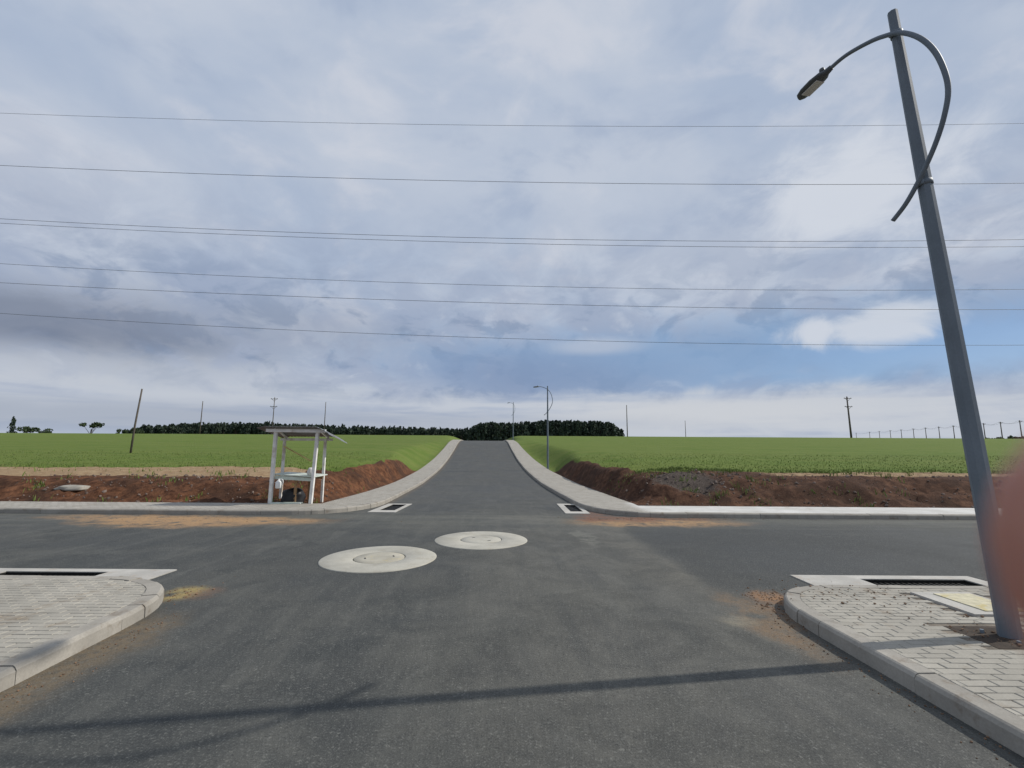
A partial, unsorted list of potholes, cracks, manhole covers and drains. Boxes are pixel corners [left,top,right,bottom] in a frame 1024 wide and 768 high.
drain grate [368,504,411,513]
drain grate [790,575,988,586]
drain grate [0,568,177,580]
manhole cover [318,546,437,573]
drain grate [557,504,590,514]
manhole cover [434,531,527,550]
